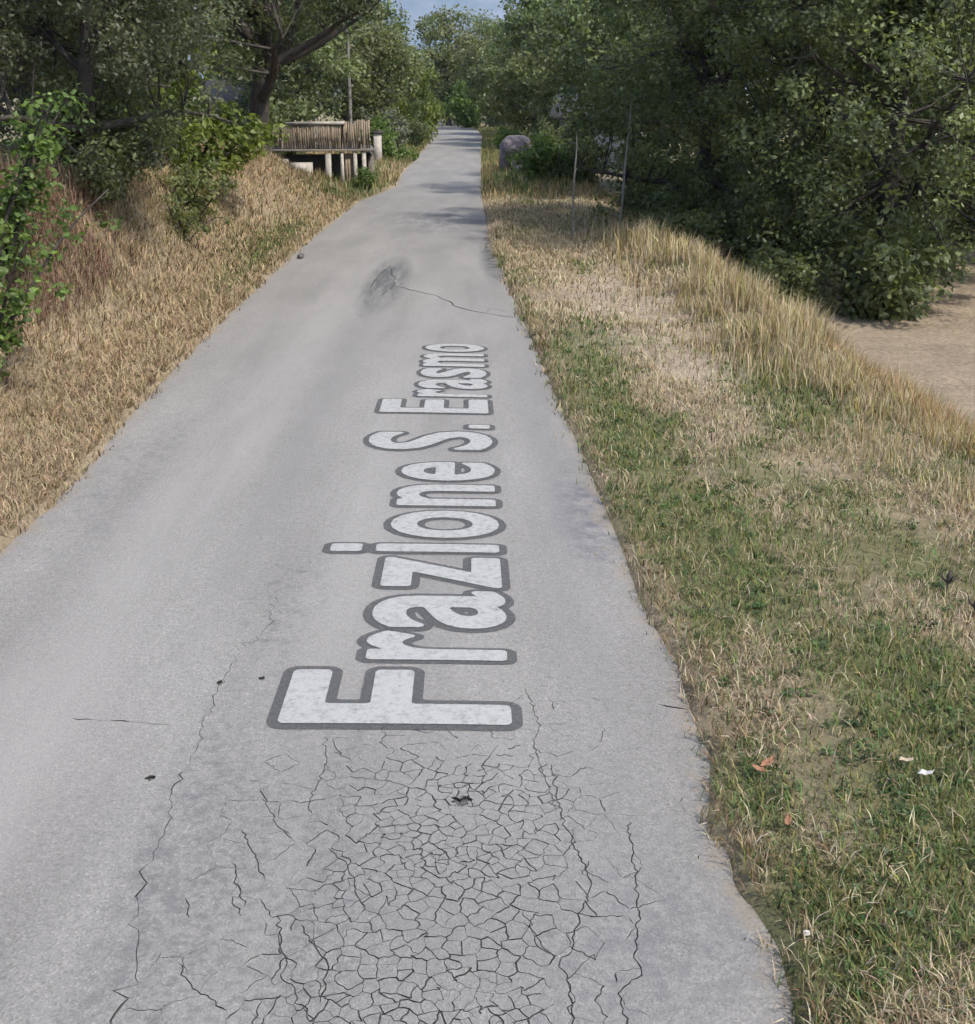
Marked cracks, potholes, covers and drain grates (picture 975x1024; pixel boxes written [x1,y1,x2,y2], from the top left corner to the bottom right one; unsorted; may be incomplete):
crack [370,265,516,318]
crack [125,689,689,1024]
pothole [451,796,473,807]
